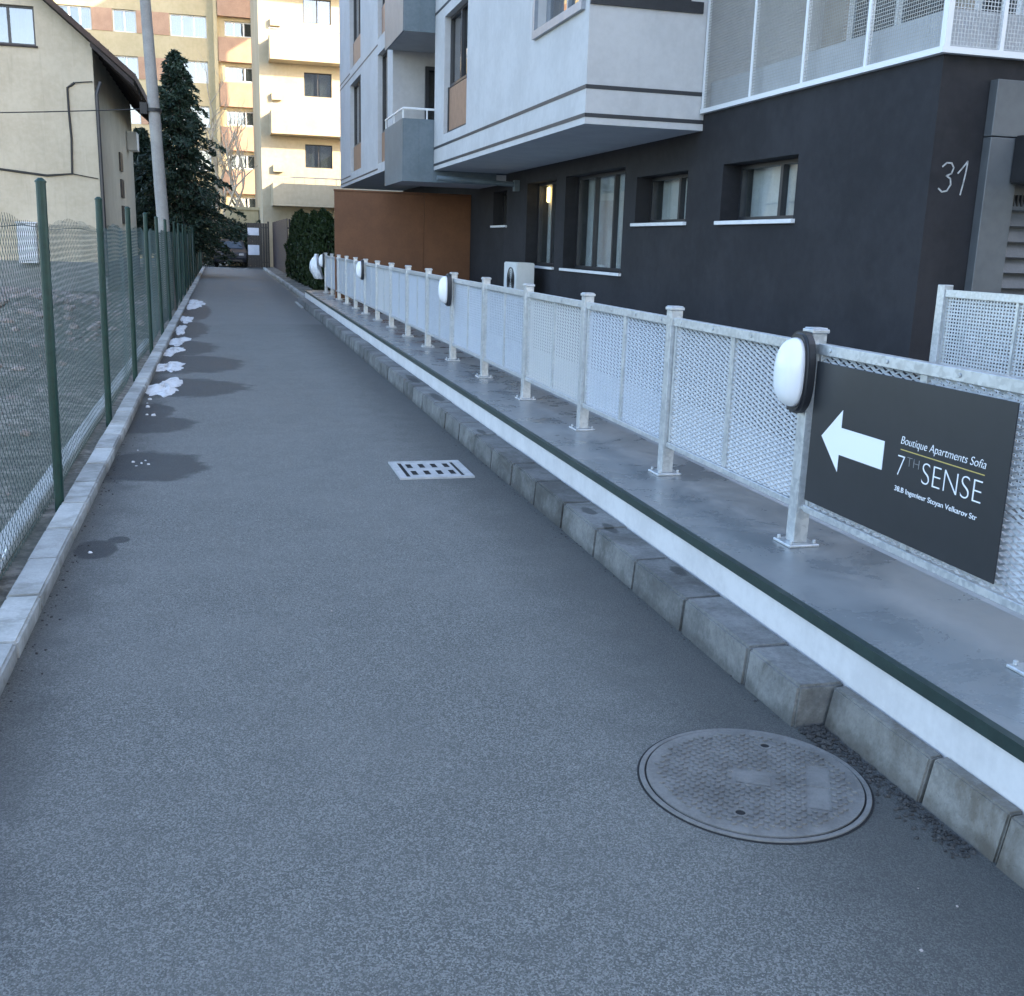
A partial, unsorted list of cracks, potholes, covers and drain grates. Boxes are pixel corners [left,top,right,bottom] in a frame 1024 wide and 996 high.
manhole cover [637,728,875,845]
drain grate [388,460,475,480]
